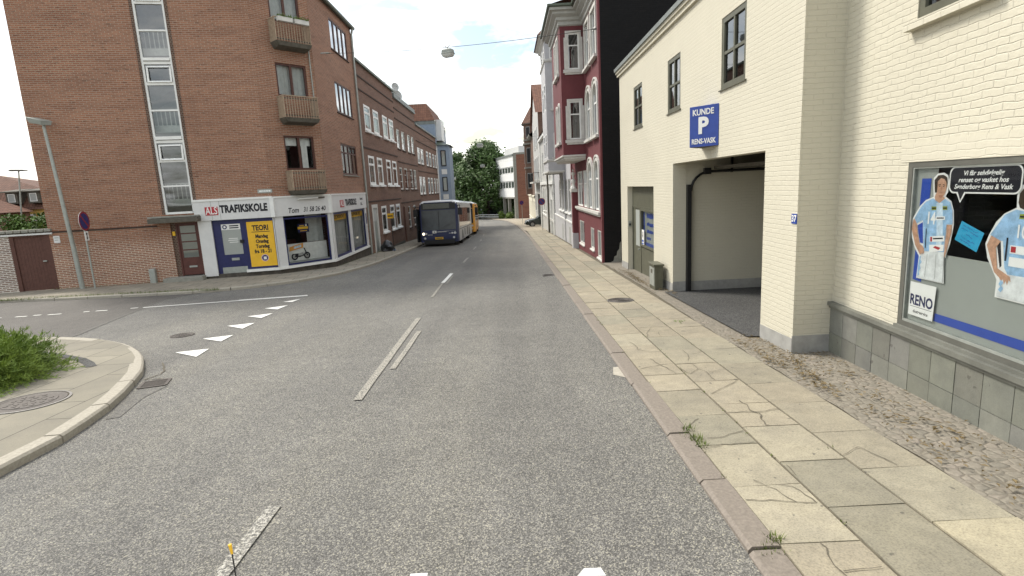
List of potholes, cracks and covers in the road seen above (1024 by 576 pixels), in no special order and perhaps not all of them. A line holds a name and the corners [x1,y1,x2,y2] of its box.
crack [630,329,778,447]
crack [820,542,882,576]
manhole cover [0,390,73,415]
drain grate [136,378,172,389]
crack [746,464,816,503]
